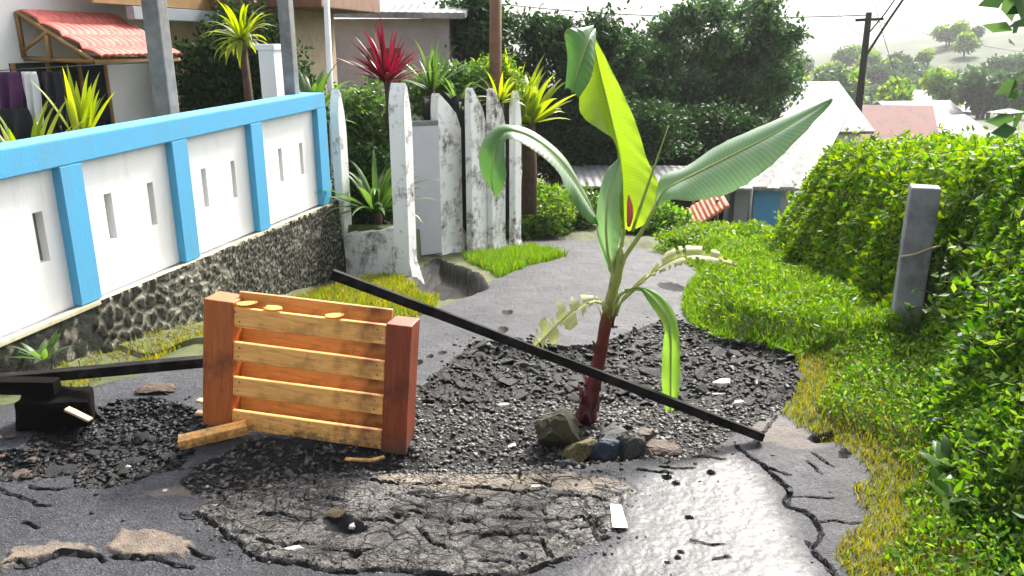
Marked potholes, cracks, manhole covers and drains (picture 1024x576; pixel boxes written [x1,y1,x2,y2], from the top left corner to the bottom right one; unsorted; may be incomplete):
pothole [412,258,491,301]
crack [3,512,310,570]
crack [742,452,859,576]
crack [258,471,622,576]
crack [0,487,63,529]
